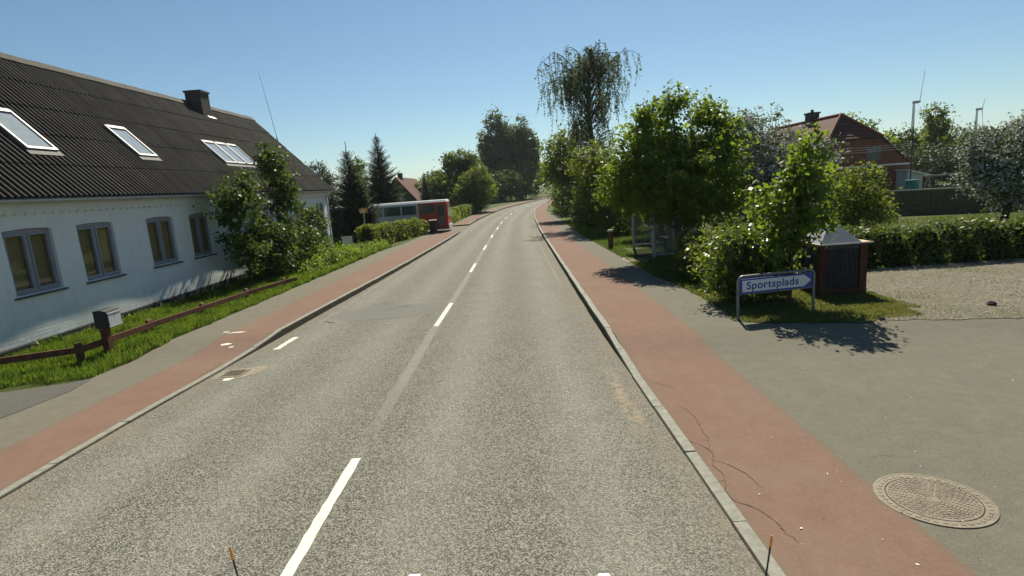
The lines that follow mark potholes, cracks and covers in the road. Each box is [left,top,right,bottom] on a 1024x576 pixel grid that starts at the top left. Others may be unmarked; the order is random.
drain grate [218,369,251,378]
crack [687,410,797,541]
manhole cover [873,473,1000,529]
